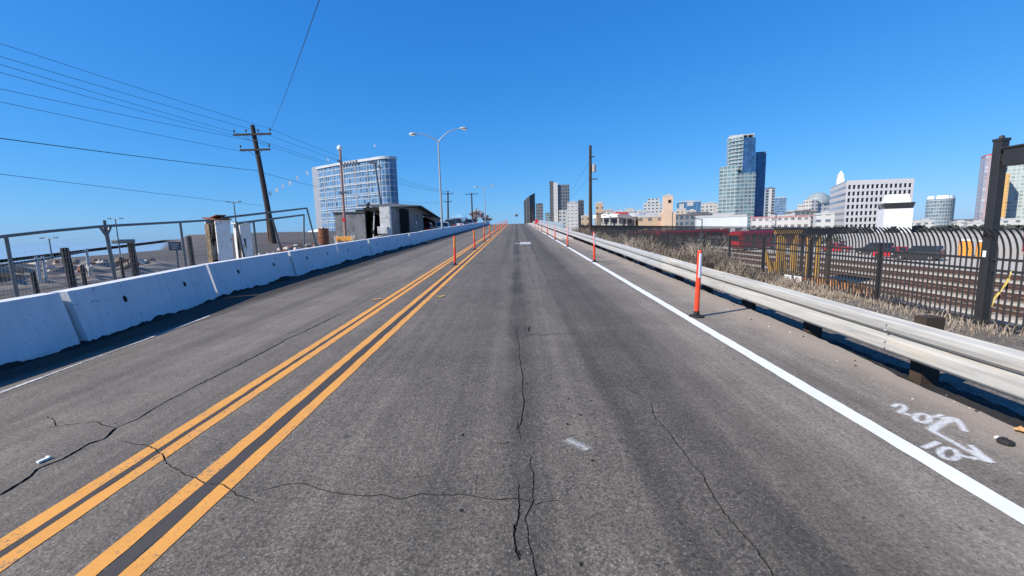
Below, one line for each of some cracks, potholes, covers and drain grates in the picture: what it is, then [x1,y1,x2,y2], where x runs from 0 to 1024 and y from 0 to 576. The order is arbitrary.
crack [651,402,774,576]
crack [0,315,337,503]
crack [498,326,530,444]
